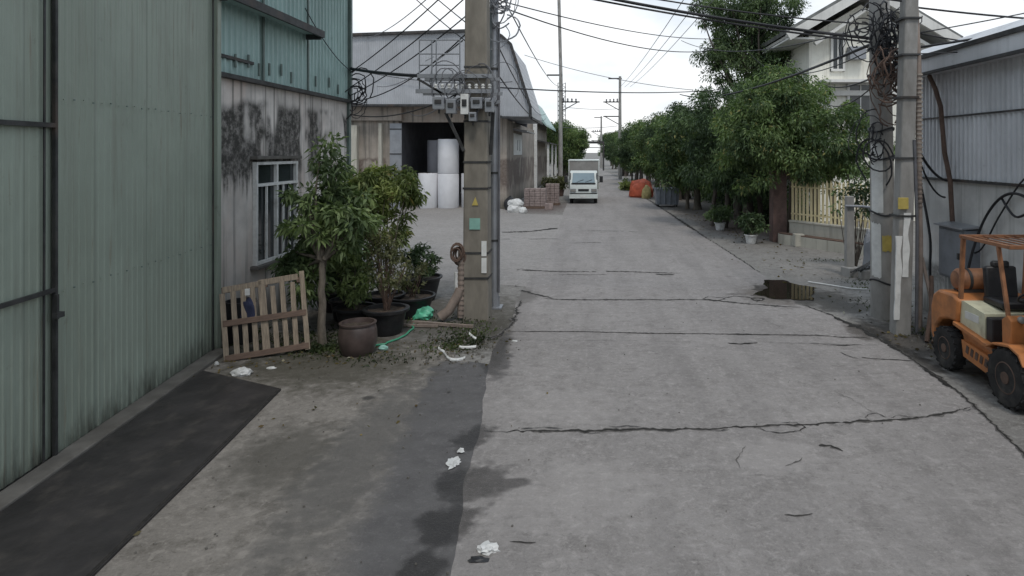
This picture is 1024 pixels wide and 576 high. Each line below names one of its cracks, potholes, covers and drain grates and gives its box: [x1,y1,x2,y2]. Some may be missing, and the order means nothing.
crack [483,269,1024,467]
